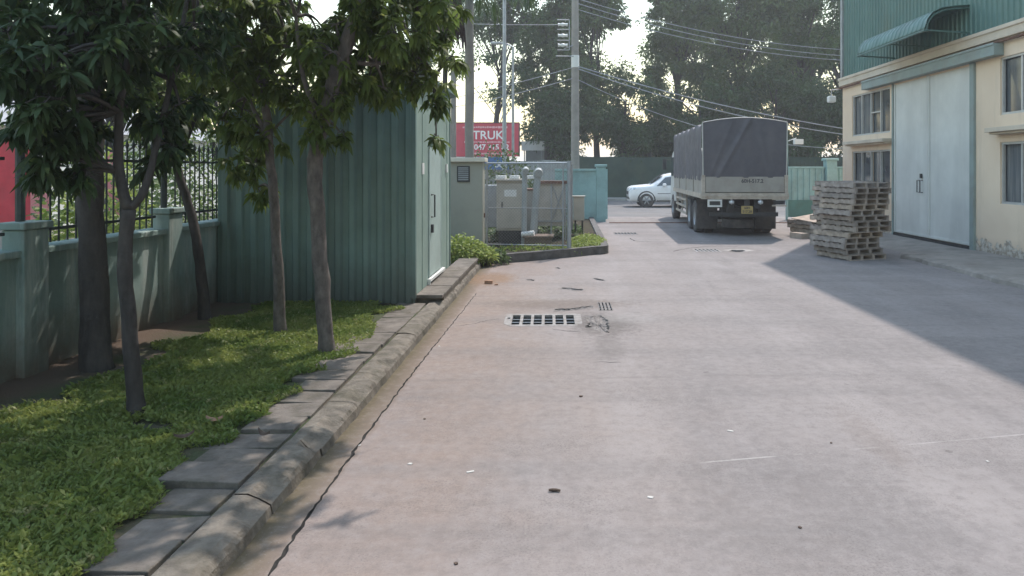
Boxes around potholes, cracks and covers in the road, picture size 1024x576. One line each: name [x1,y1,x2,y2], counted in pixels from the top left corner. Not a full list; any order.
drain grate [597,302,613,311]
drain grate [504,314,582,326]
